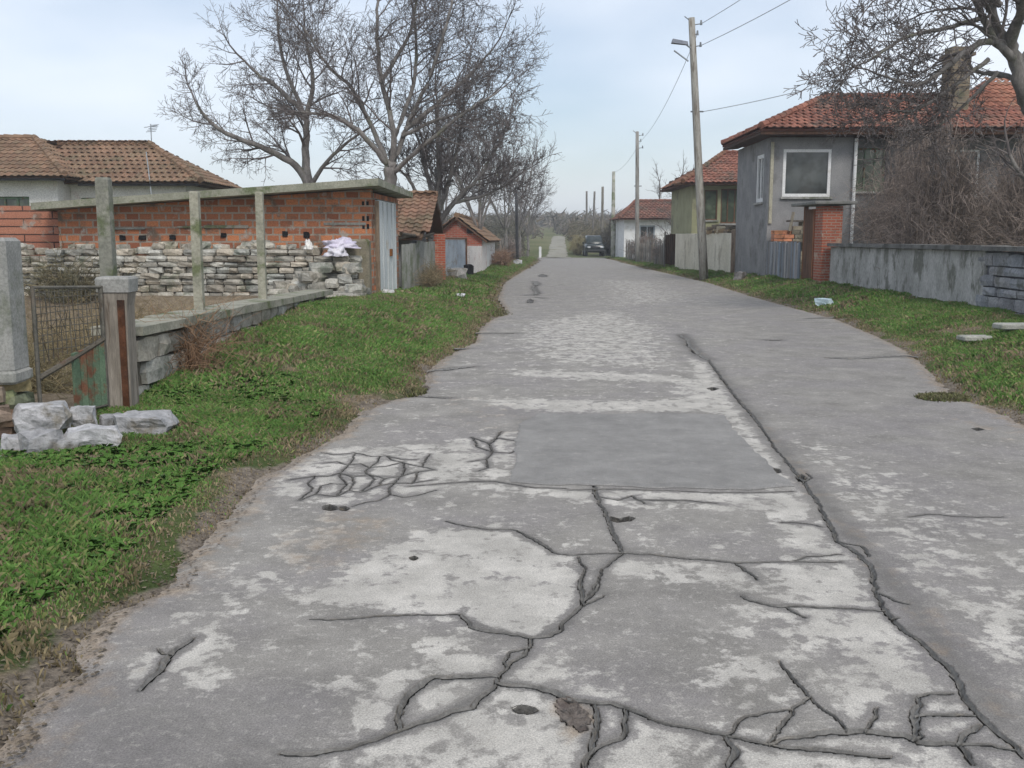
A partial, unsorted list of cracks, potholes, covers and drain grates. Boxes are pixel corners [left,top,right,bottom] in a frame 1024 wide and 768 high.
pothole [553,696,592,733]
crack [138,638,195,691]
crack [280,432,1018,768]
pothole [512,704,539,715]
